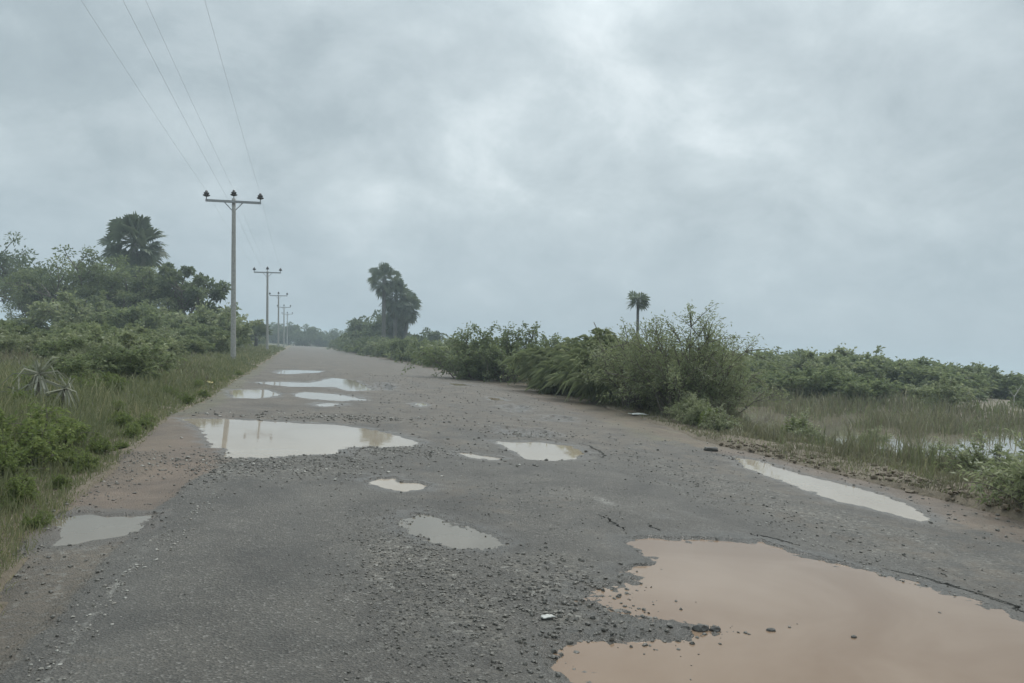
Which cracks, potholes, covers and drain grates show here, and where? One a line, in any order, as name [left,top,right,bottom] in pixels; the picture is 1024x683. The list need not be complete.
pothole [175,417,427,459]
pothole [486,439,592,461]
pothole [454,451,505,460]
pothole [728,456,950,524]
pothole [392,511,516,551]
pothole [534,535,1024,683]
pothole [250,377,375,391]
pothole [363,476,435,492]
pothole [288,391,374,401]
pothole [37,509,162,547]
pothole [222,389,285,399]
